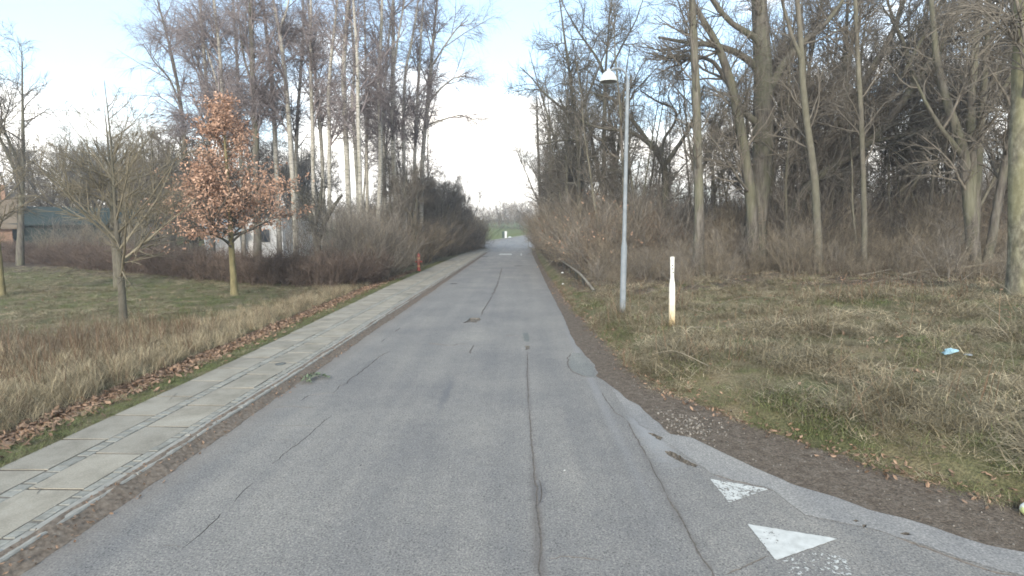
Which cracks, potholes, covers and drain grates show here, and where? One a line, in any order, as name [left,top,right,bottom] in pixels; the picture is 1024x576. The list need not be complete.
pothole [665,451,698,467]
crack [167,328,400,547]
